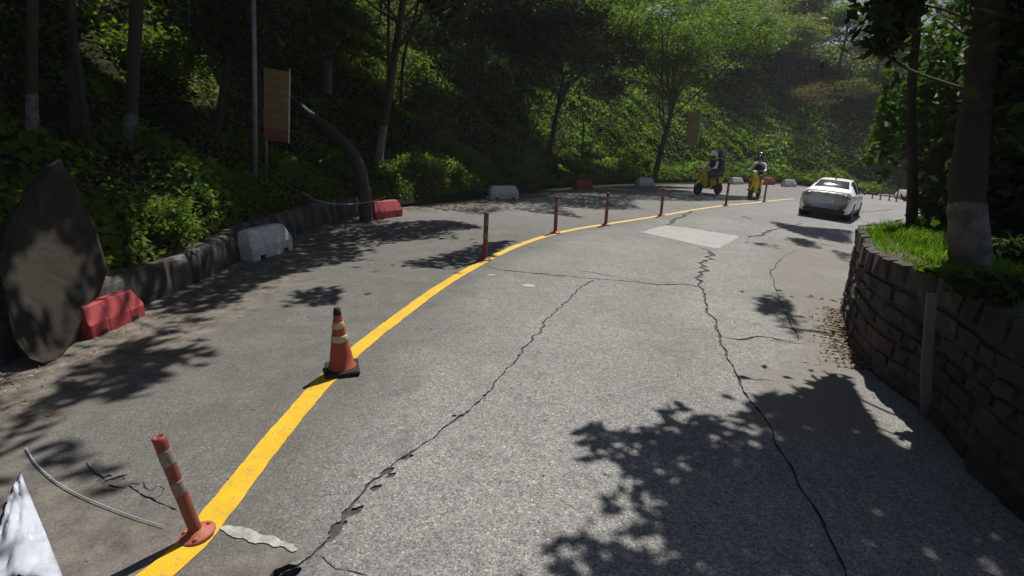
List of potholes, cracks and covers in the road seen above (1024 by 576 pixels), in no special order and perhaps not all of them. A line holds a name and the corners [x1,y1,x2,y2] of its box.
crack [278,209,847,576]
crack [86,462,176,510]
